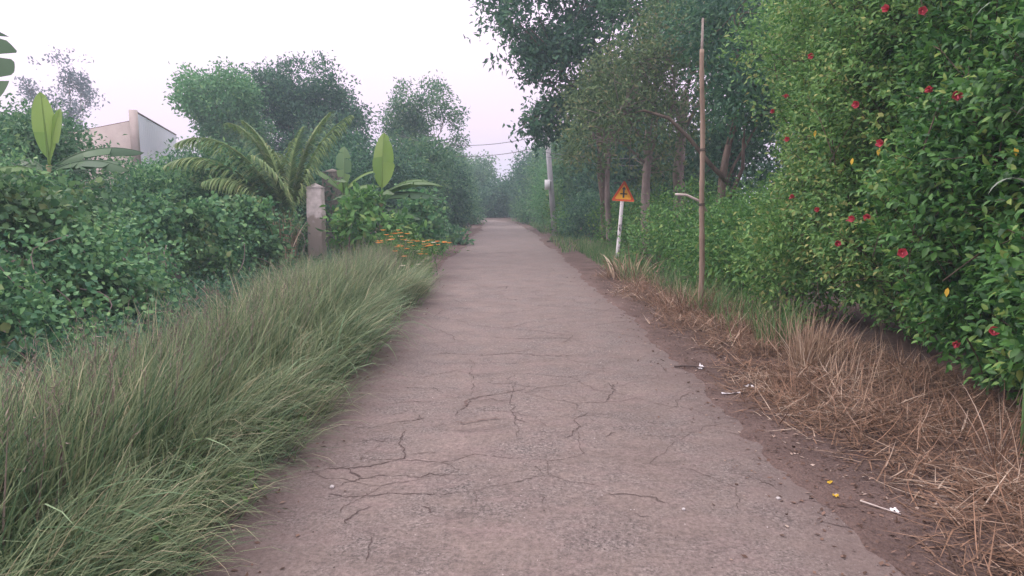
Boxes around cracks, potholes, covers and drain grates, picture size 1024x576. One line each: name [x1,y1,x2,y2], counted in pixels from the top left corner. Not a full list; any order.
crack [420,266,644,342]
crack [300,342,740,560]
